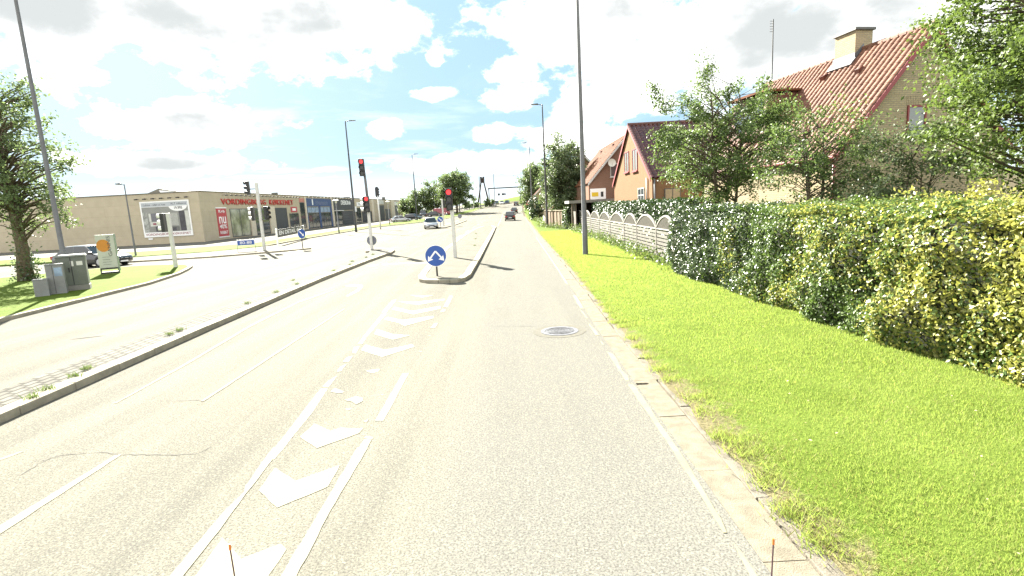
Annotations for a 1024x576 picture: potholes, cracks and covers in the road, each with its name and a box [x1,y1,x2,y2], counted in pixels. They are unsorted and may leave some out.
crack [21,447,210,475]
manhole cover [533,325,586,338]
